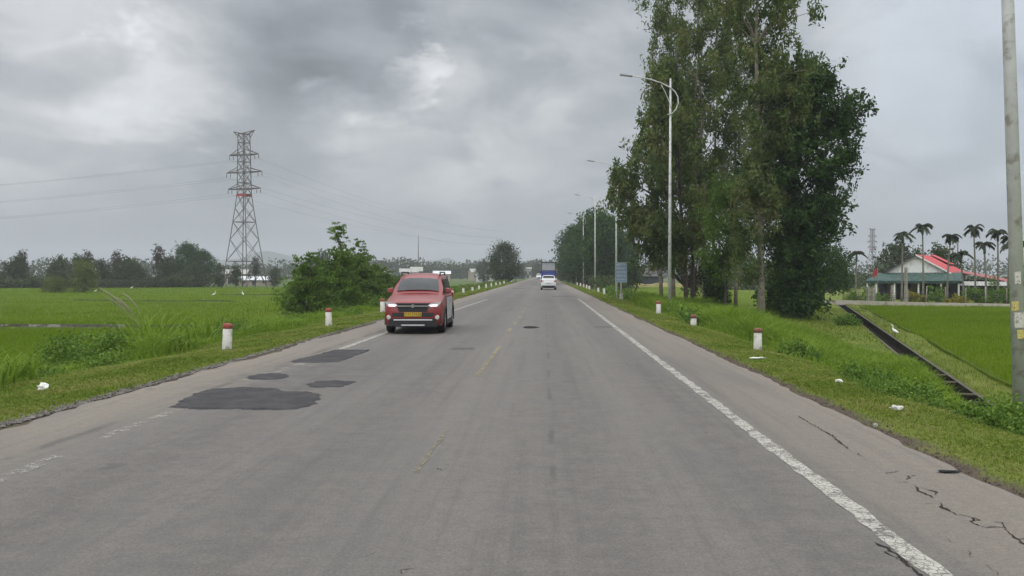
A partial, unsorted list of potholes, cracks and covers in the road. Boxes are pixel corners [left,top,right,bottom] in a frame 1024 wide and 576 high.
crack [886,471,1024,544]
crack [874,541,923,576]
